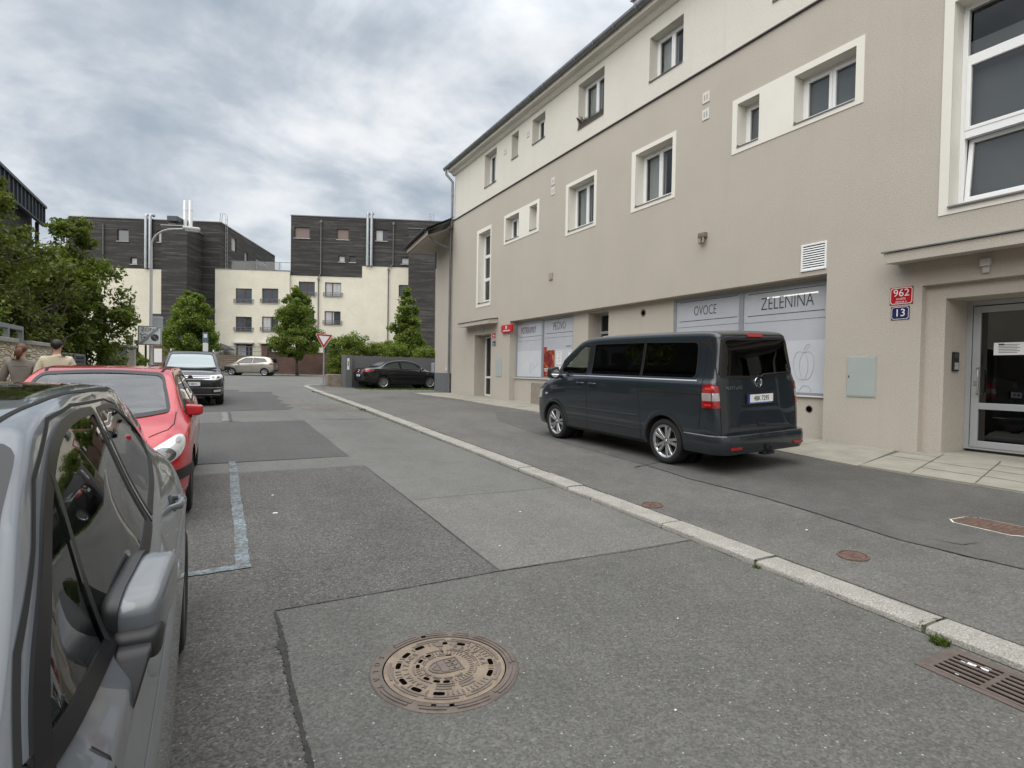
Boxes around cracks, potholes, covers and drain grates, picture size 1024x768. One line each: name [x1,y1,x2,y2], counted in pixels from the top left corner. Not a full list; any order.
manhole cover [369,631,519,714]
drain grate [915,647,1024,712]
utility cover [836,550,870,561]
